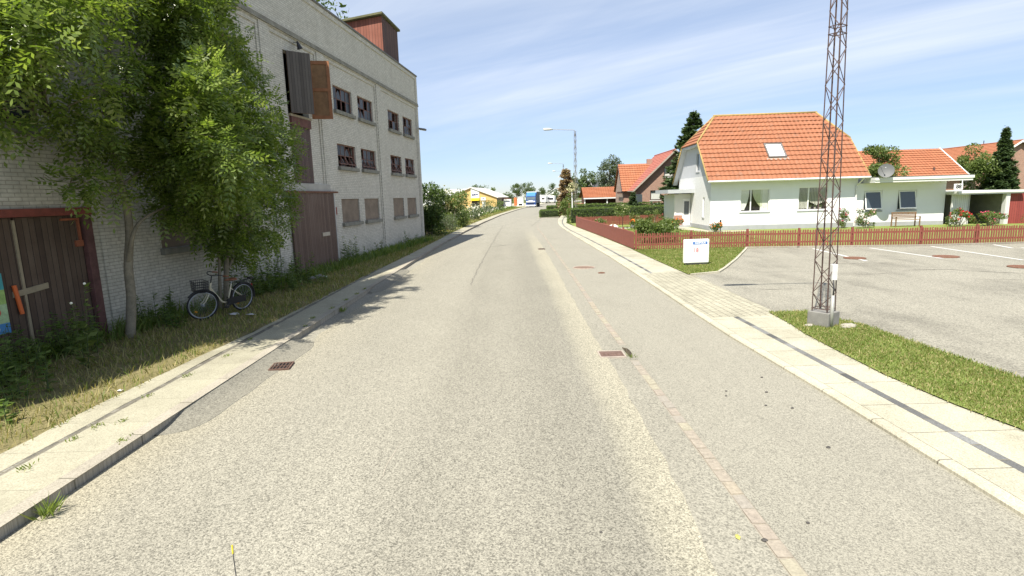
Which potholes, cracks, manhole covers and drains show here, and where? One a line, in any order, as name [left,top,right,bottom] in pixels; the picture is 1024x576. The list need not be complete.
drain grate [268,361,295,371]
